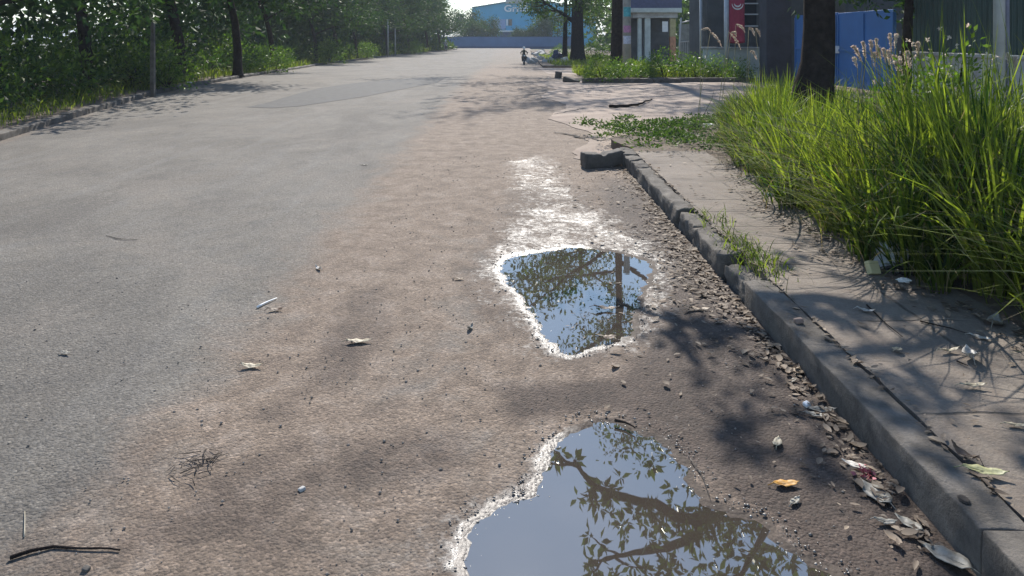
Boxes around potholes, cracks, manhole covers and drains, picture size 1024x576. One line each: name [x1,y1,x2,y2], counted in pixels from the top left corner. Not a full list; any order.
pothole [432,411,860,576]
pothole [490,242,665,360]
